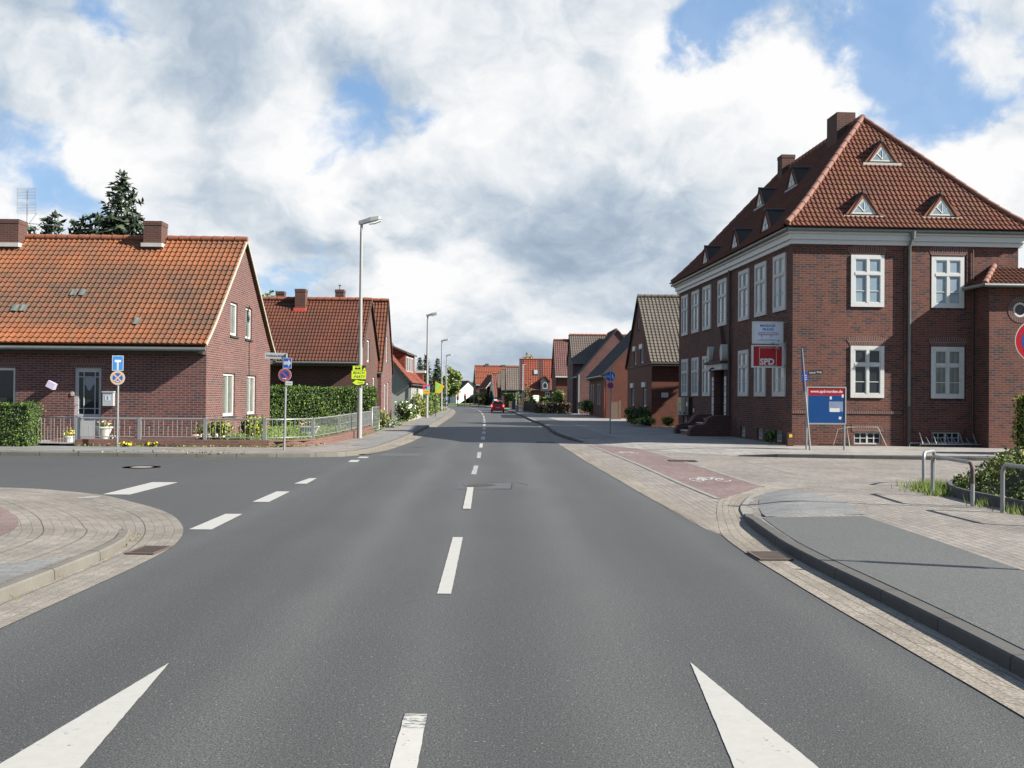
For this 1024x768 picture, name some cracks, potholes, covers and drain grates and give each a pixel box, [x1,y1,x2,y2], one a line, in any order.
drain grate [124,545,172,555]
drain grate [747,551,794,560]
